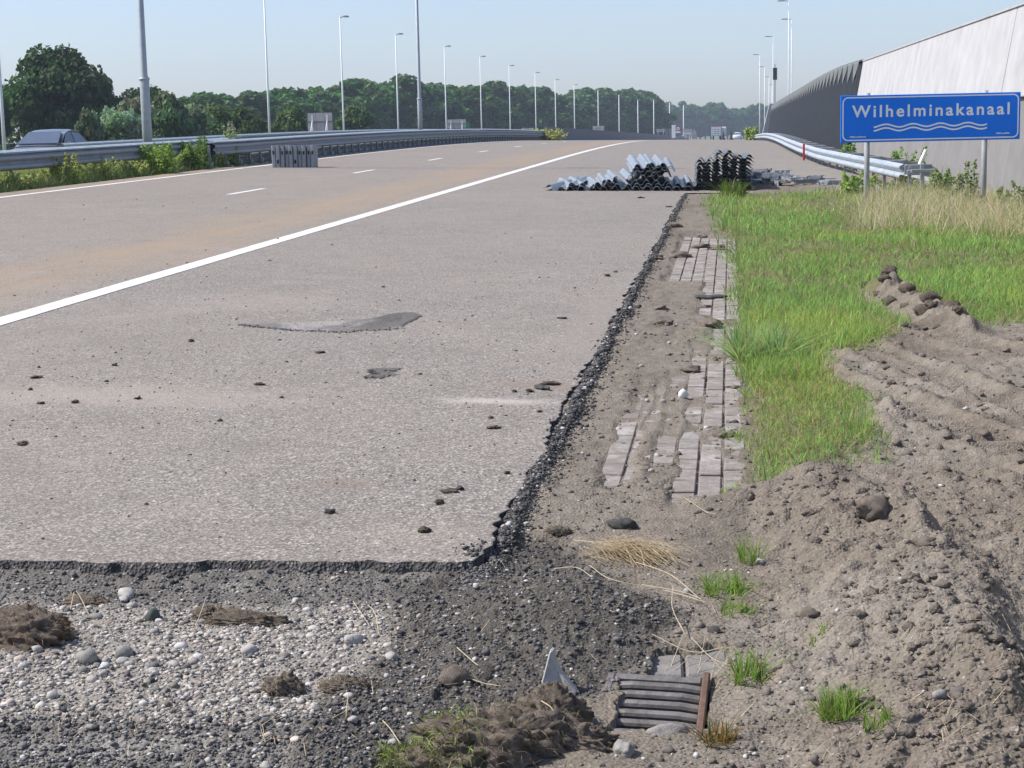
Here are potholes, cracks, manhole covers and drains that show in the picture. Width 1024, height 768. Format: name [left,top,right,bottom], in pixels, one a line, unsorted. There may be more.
drain grate [605,672,710,737]
